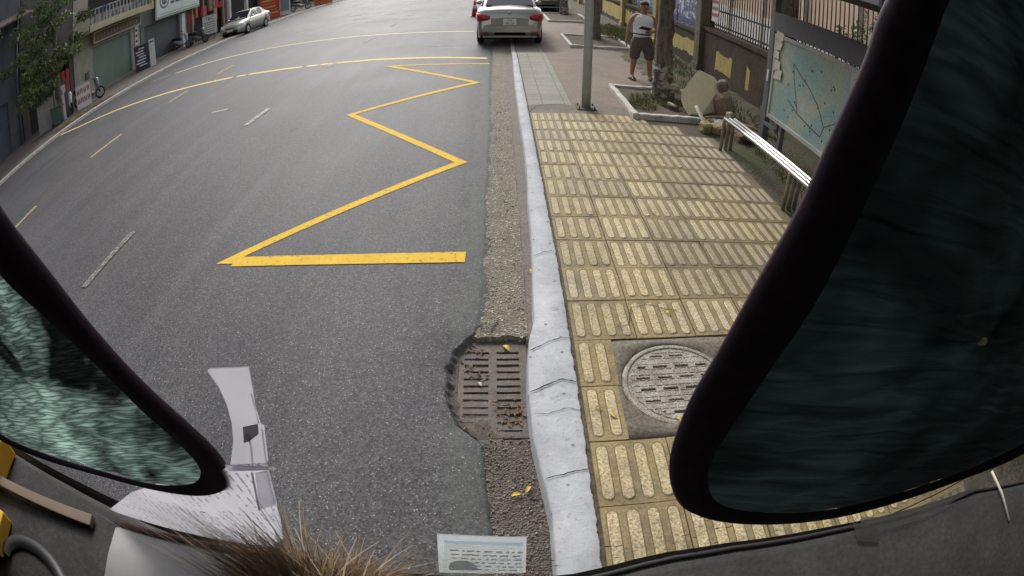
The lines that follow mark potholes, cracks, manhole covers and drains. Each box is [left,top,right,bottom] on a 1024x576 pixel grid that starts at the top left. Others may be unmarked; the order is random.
manhole cover [622,345,713,424]
drain grate [455,342,529,440]
